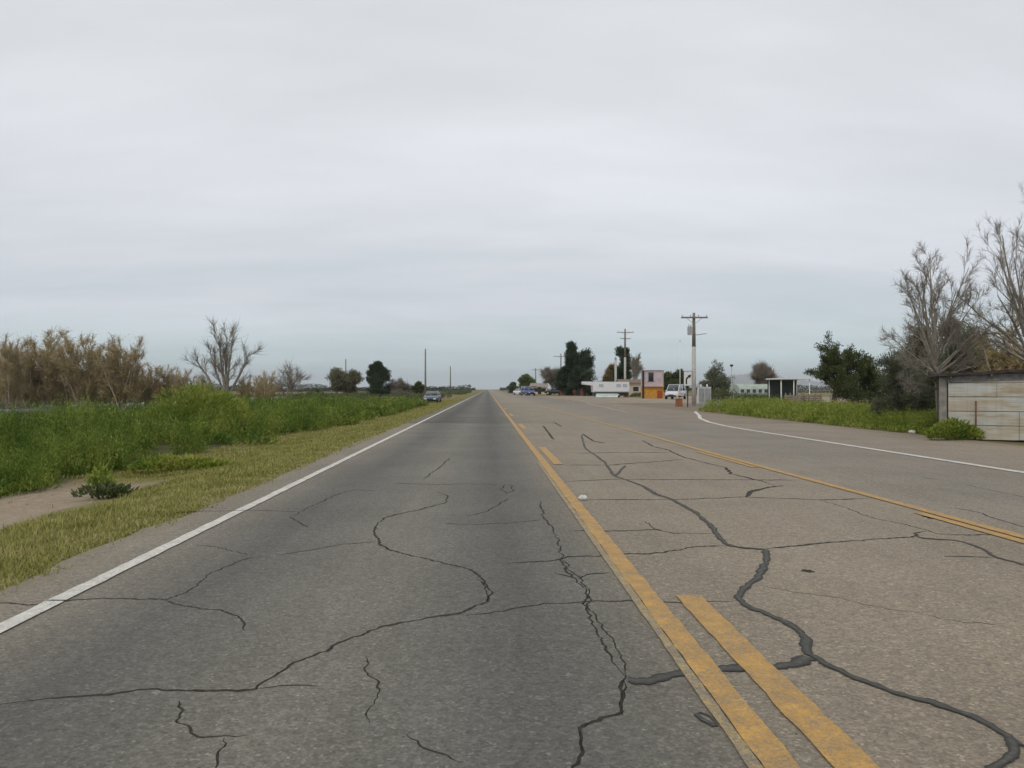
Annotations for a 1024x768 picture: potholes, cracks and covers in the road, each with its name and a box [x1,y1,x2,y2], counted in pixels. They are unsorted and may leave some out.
crack [765,586,1009,627]
crack [0,458,733,768]
crack [568,434,1023,536]
